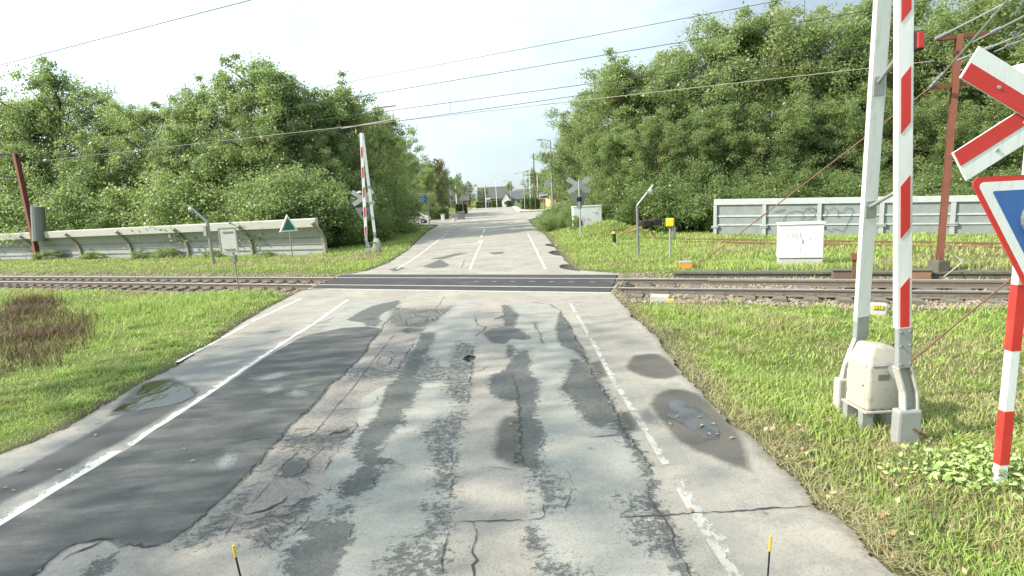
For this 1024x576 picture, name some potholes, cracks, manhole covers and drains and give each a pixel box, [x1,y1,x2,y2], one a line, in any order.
crack [427,320,545,576]
crack [377,296,451,371]
crack [631,505,809,517]
